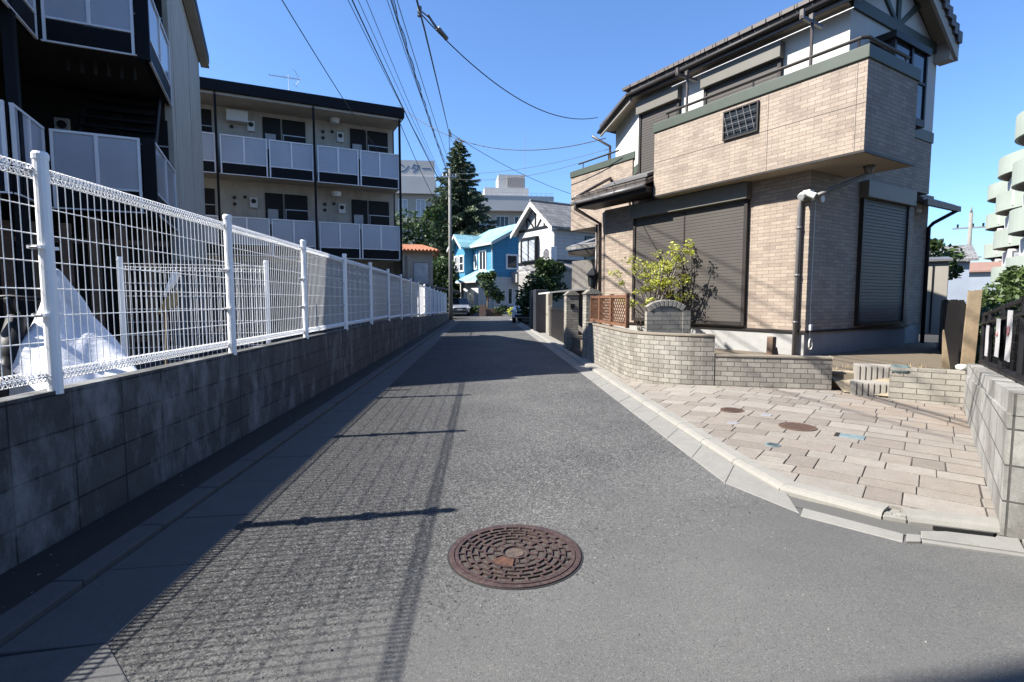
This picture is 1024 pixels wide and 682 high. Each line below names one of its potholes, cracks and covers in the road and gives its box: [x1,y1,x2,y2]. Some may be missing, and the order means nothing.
manhole cover [778,422,817,432]
manhole cover [447,524,583,590]
